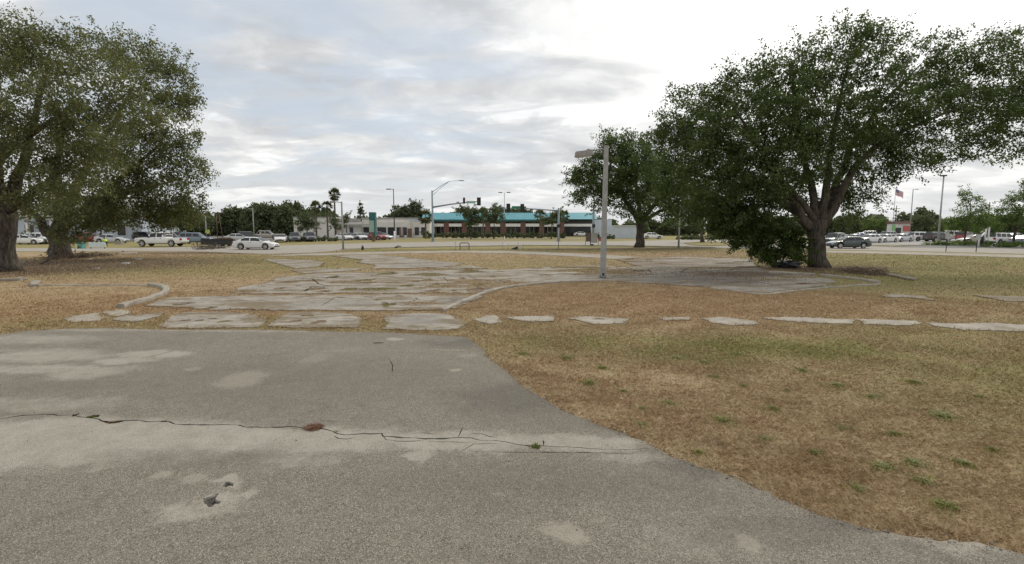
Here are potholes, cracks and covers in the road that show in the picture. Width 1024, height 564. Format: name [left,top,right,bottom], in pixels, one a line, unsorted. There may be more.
crack [240,262,480,307]
pothole [203,493,221,507]
crack [1,414,647,453]
